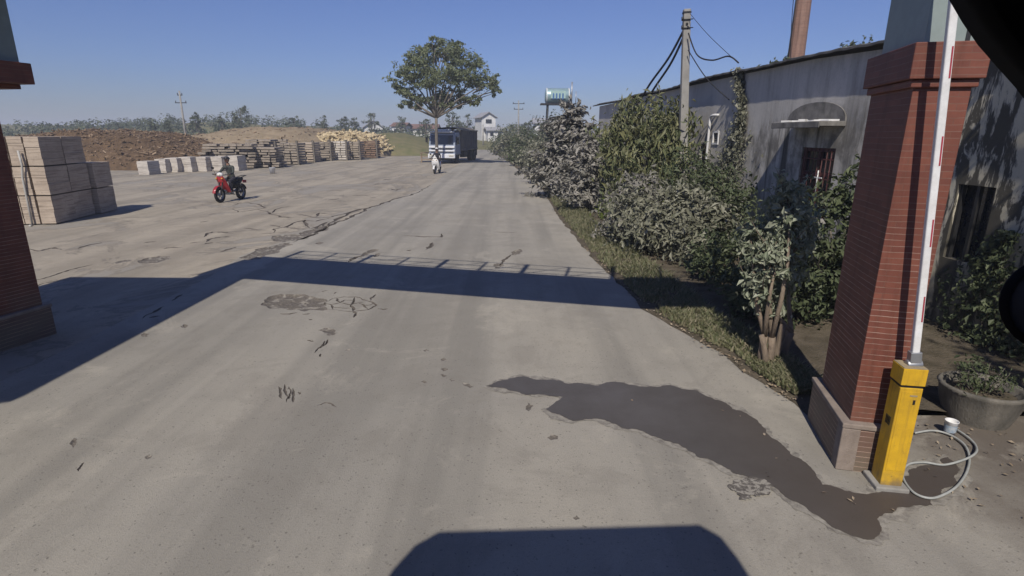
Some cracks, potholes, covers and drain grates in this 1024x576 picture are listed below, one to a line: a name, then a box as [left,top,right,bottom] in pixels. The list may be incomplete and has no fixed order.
crack [144,166,410,252]
crack [30,243,99,286]
